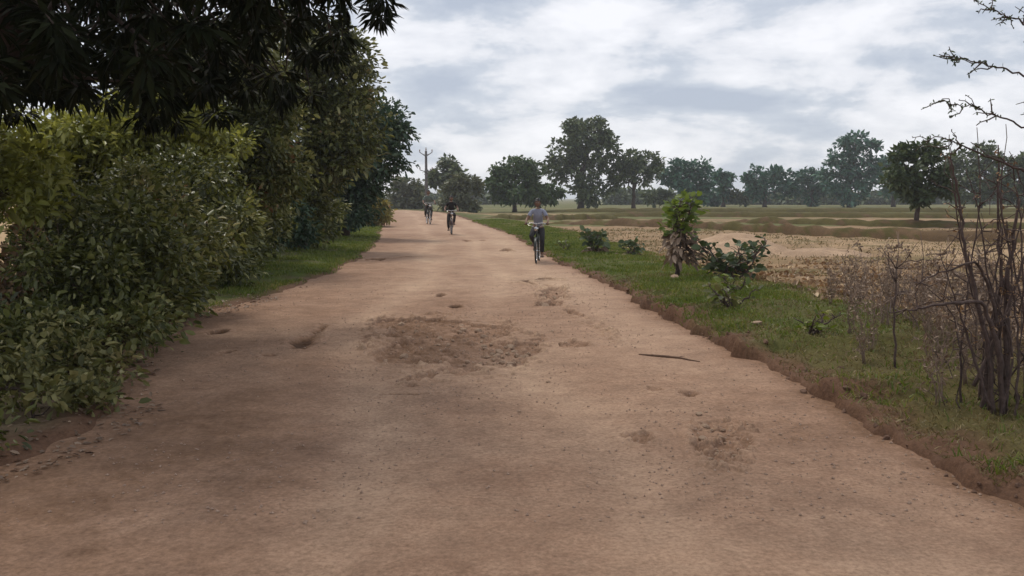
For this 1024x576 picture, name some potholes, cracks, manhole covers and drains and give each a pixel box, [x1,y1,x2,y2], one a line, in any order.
pothole [608,429,671,449]
pothole [529,283,576,308]
pothole [197,328,238,337]
pothole [555,304,636,344]
pothole [678,415,767,477]
pothole [276,323,339,352]
pothole [667,389,714,400]
pothole [350,311,559,390]
pothole [539,337,600,351]
